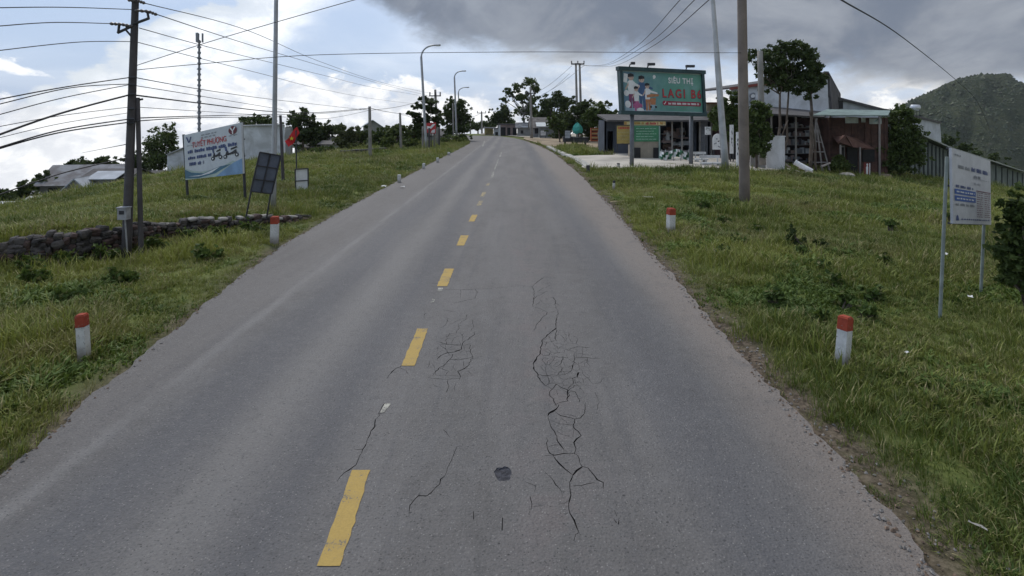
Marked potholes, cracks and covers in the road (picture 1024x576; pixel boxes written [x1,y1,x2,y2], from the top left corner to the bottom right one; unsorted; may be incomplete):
crack [424,283,477,390]
pothole [494,466,512,481]
crack [409,430,457,511]
crack [485,277,604,540]
crack [337,403,386,481]
